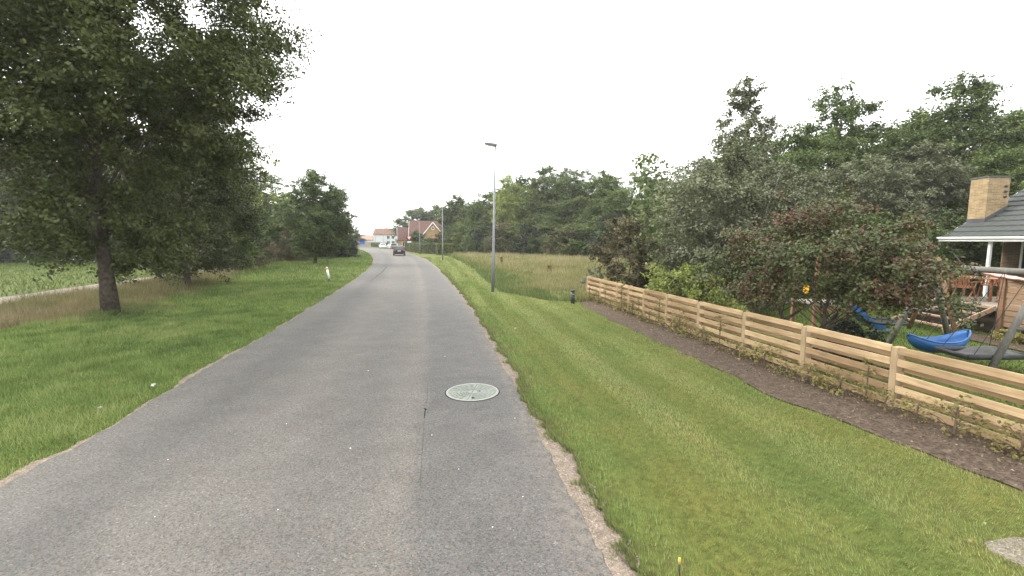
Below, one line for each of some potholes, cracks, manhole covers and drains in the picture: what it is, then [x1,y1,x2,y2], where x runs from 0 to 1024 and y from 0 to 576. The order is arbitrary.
manhole cover [445,383,500,402]
